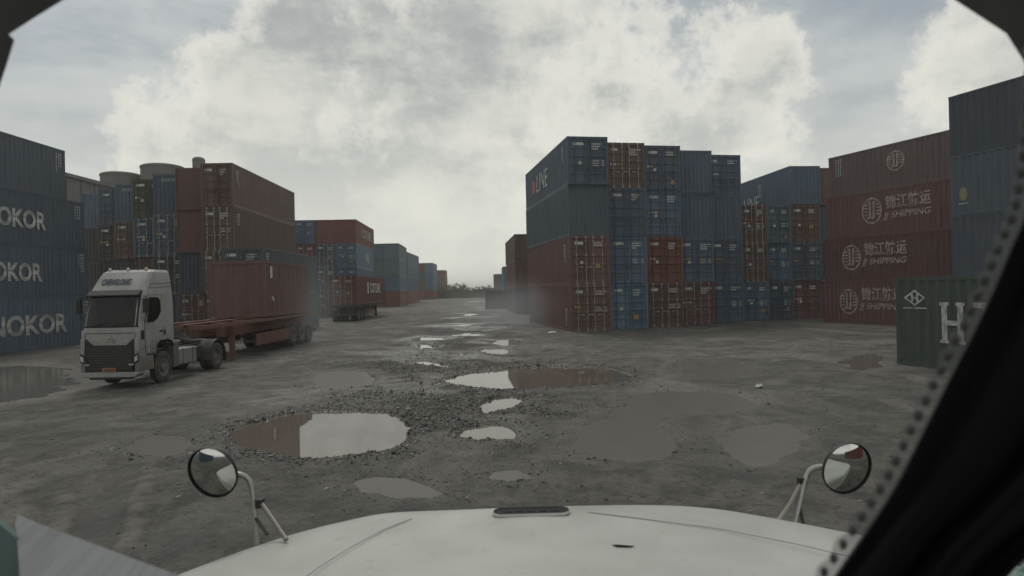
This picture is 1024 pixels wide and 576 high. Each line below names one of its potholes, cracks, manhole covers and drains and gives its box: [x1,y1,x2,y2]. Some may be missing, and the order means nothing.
pothole [469,393,535,416]
pothole [399,357,473,368]
pothole [485,338,529,346]
pothole [823,351,899,372]
pothole [212,404,423,460]
pothole [472,346,515,355]
pothole [434,364,641,391]
pothole [0,363,95,407]
pothole [446,419,532,441]
